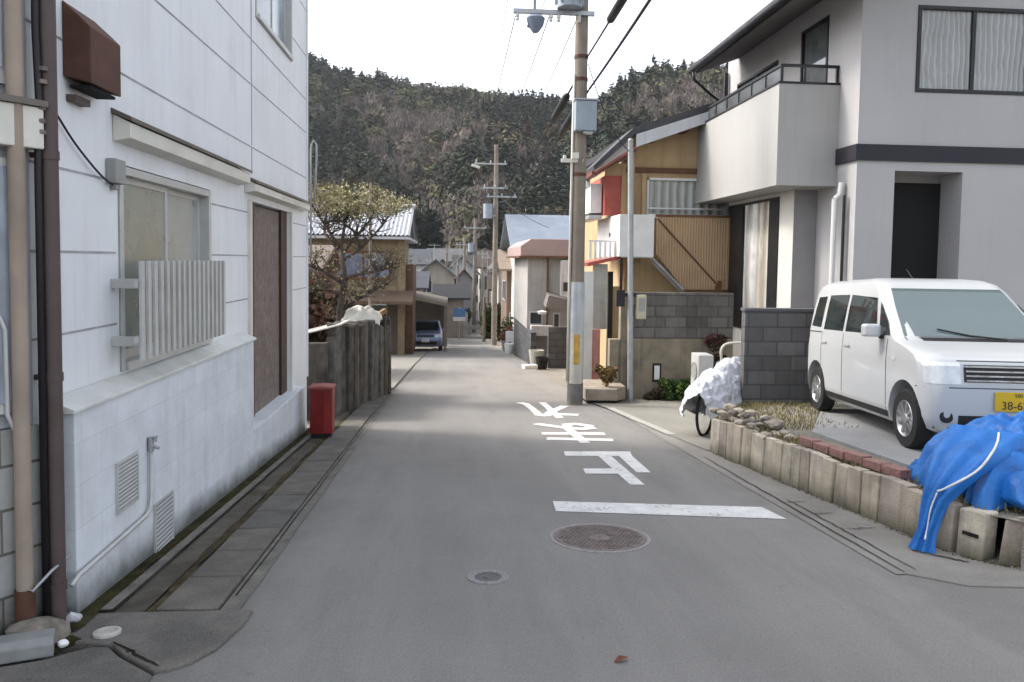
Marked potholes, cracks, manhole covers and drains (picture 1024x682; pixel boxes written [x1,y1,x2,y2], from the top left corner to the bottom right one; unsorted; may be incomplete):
manhole cover [549,523,651,553]
crack [113,641,159,666]
manhole cover [467,569,510,585]
